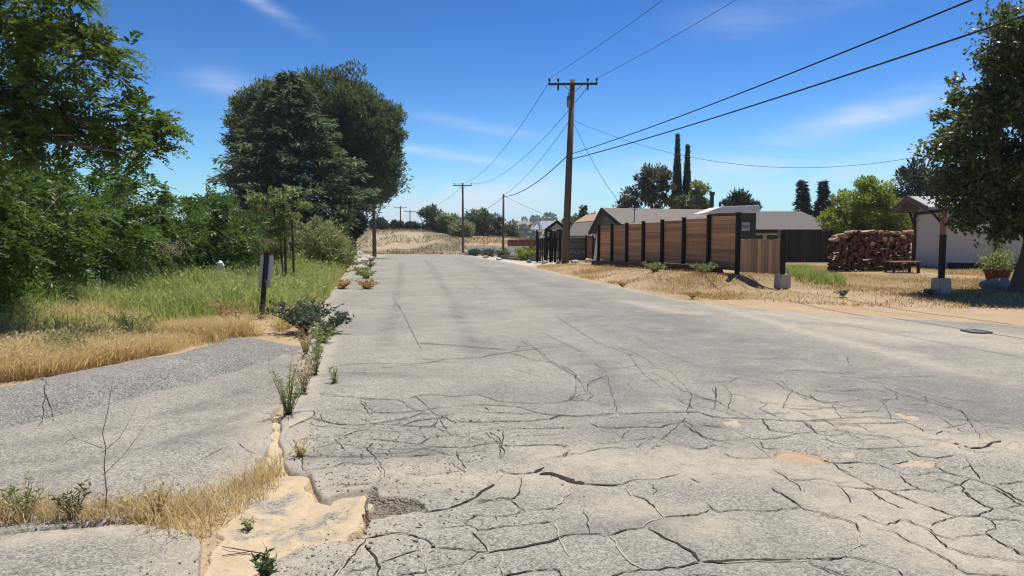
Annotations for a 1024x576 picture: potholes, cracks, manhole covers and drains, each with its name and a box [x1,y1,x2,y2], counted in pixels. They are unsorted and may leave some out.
pothole [203,414,374,576]
pothole [770,450,834,465]
pothole [893,460,937,468]
pothole [363,495,429,531]
pothole [928,441,964,450]
crack [284,319,1024,576]
